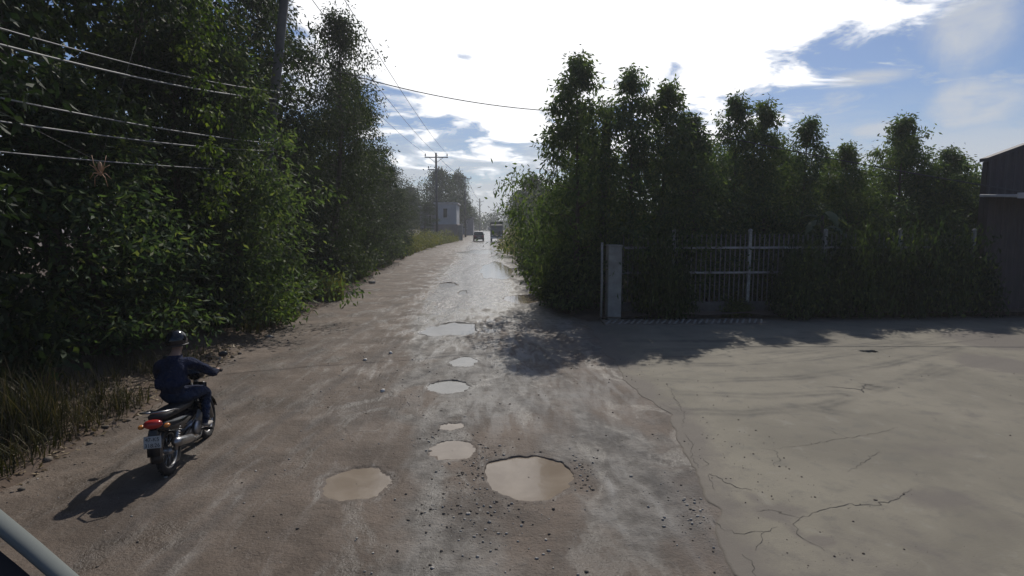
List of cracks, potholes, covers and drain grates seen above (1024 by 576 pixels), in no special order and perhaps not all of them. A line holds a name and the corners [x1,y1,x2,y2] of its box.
pothole [430,420,473,433]
pothole [415,321,481,337]
pothole [420,438,484,463]
pothole [477,453,583,505]
crack [714,490,910,571]
pothole [421,378,476,395]
pothole [444,356,482,368]
crack [667,386,751,490]
pothole [310,463,402,506]
